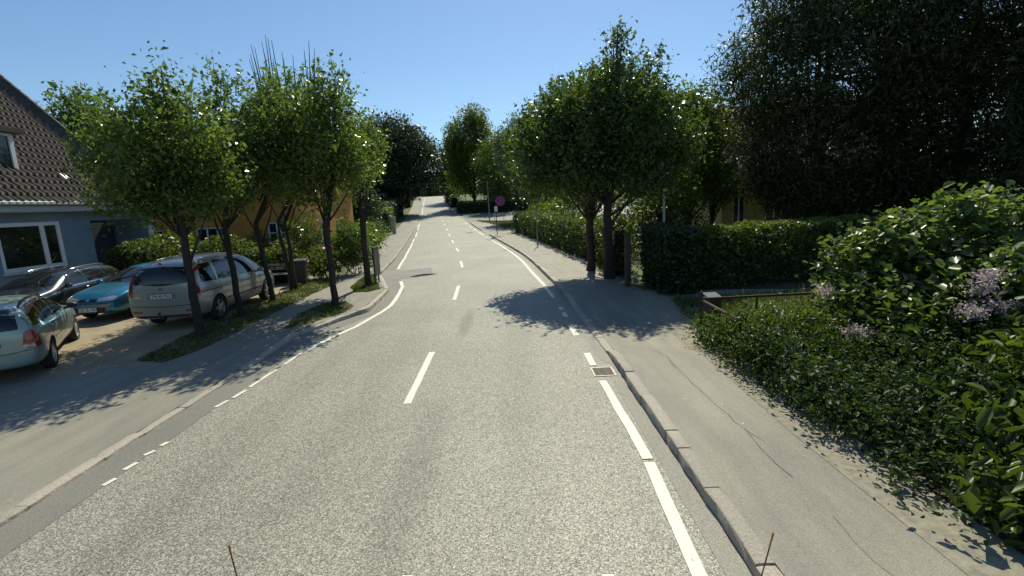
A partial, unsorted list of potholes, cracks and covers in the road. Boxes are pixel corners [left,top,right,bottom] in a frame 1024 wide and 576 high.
crack [659,351,793,477]
drain grate [590,367,617,377]
